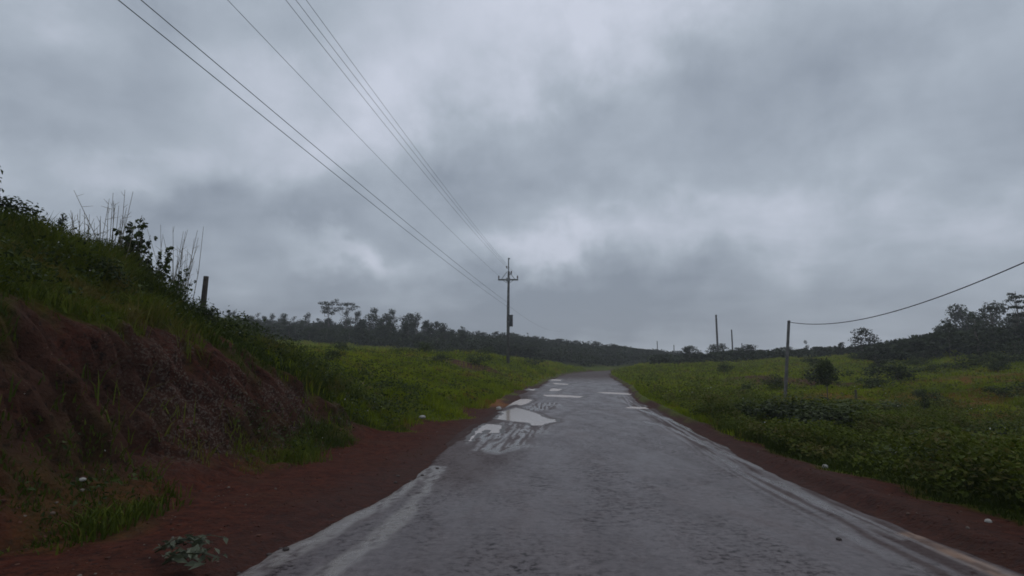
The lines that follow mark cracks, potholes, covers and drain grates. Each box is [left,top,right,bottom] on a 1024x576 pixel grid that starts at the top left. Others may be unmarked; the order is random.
pothole [493,407,561,426]
pothole [464,423,506,442]
